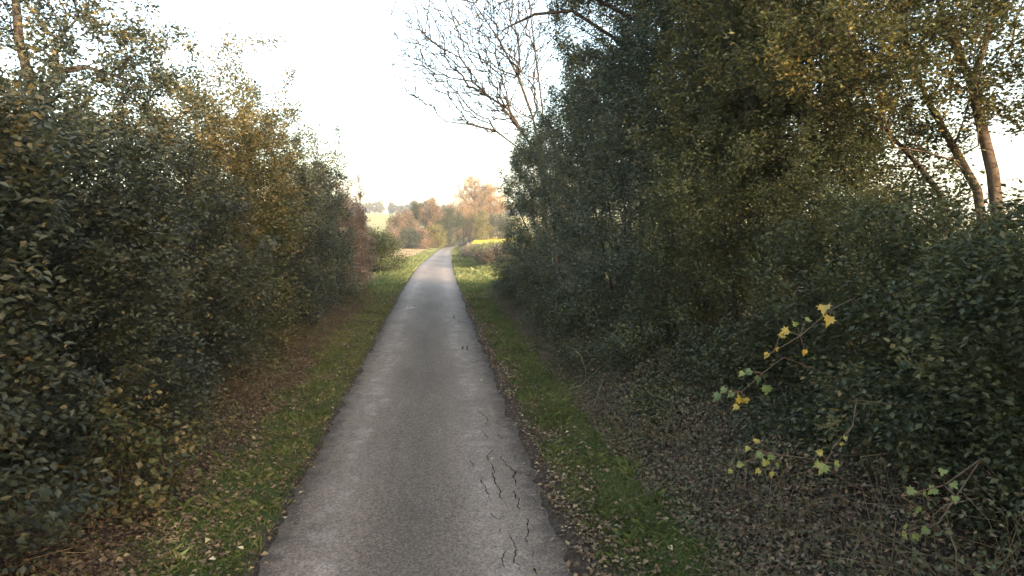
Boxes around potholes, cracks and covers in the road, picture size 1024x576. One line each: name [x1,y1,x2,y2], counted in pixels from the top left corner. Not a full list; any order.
crack [470,412,538,575]
